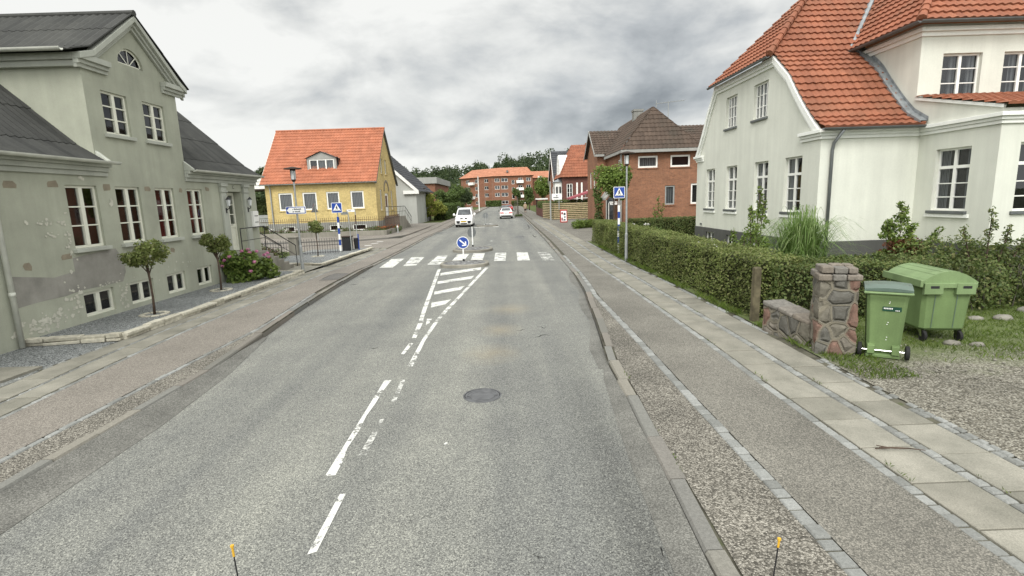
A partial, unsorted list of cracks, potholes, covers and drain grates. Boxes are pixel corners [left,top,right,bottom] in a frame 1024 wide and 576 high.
manhole cover [463,388,502,403]
